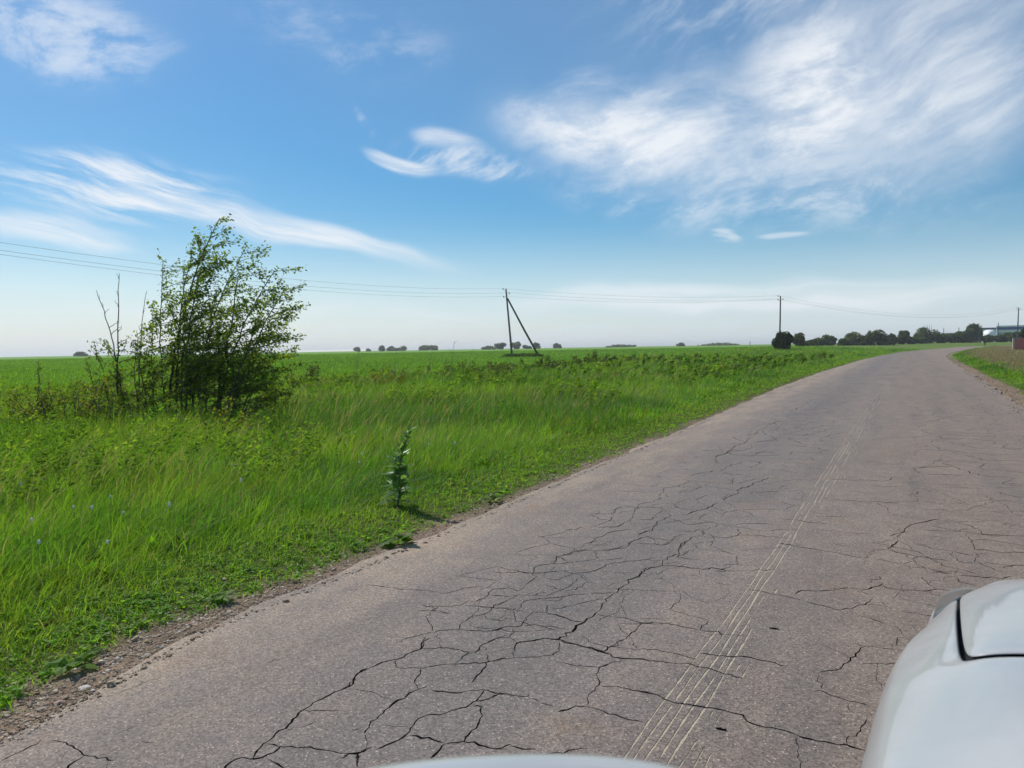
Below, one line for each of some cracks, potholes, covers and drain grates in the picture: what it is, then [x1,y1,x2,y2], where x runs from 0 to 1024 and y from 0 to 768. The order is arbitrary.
crack [224,389,1024,768]
